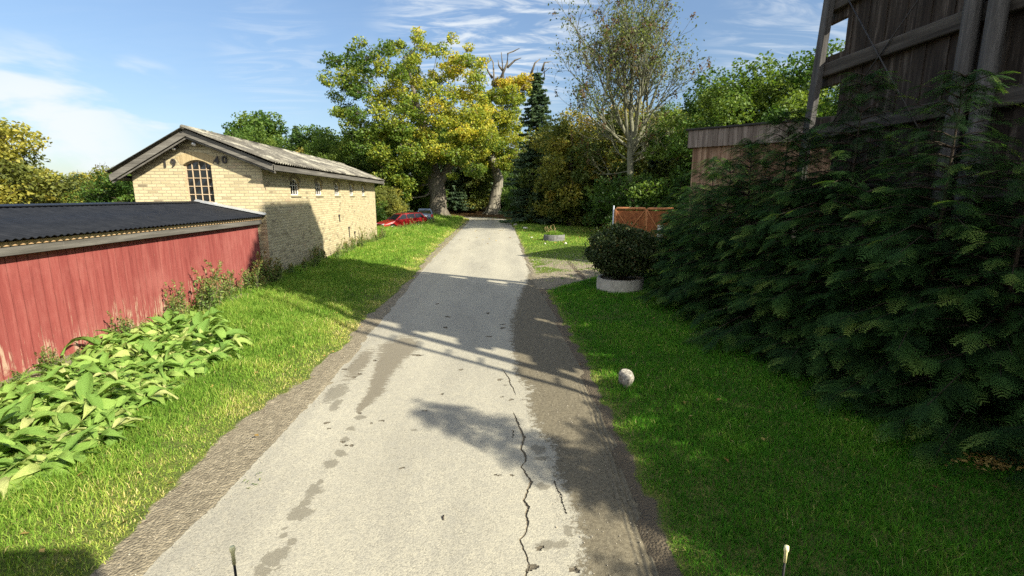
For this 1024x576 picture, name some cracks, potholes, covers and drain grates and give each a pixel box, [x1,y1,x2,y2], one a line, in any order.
crack [512,413,533,576]
